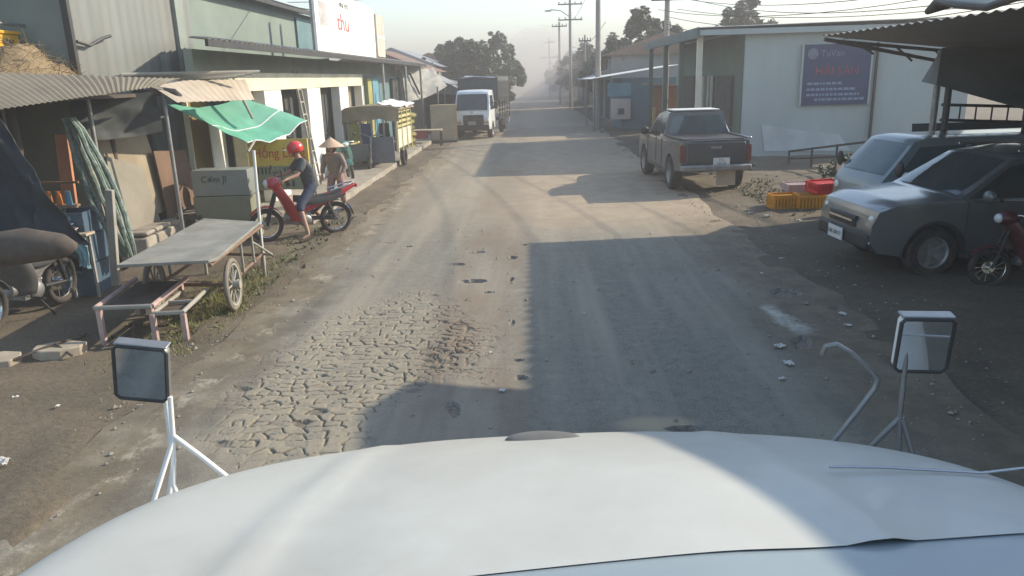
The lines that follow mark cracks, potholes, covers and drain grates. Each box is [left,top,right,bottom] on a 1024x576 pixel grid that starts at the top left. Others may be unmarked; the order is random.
pothole [445,400,461,418]
pothole [790,335,812,350]
